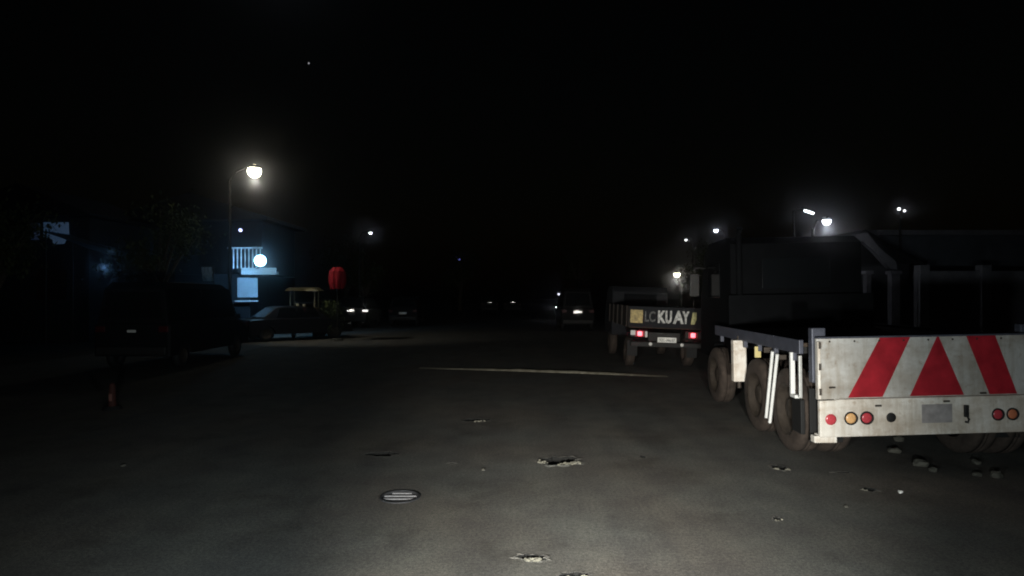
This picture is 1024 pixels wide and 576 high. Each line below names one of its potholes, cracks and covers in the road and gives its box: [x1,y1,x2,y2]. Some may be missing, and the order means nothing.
pothole [507,553,552,563]
pothole [531,455,586,467]
pothole [767,464,791,472]
